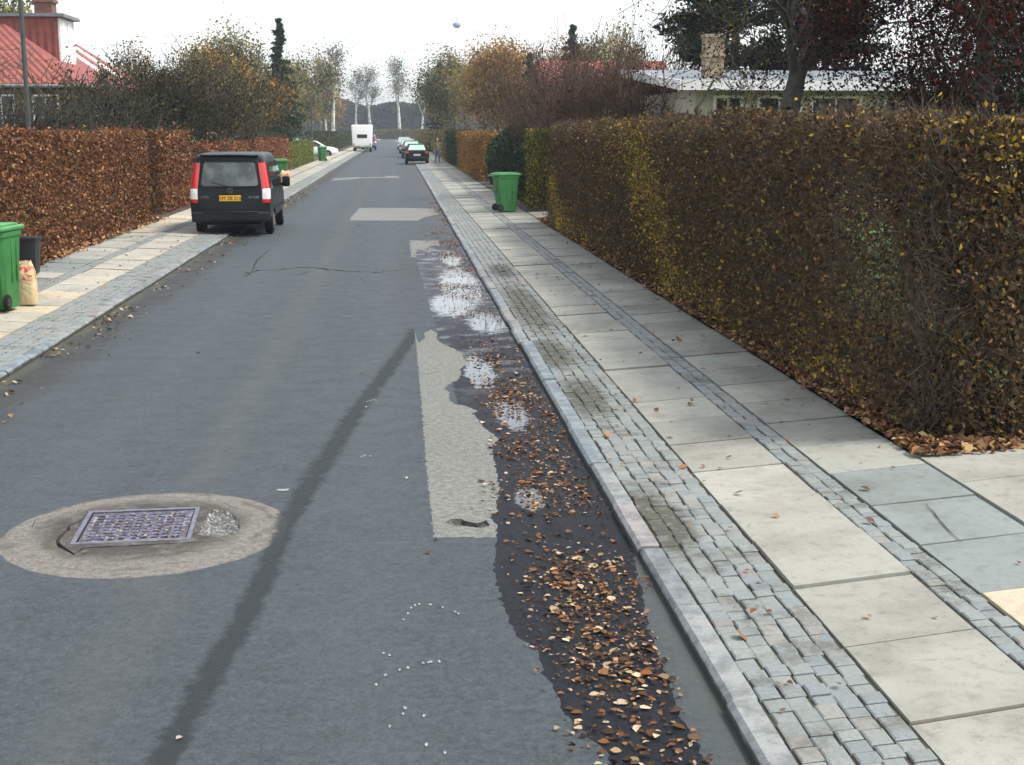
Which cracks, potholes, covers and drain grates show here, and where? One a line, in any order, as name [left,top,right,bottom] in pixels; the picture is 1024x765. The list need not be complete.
pothole [197,509,240,537]
crack [243,250,406,287]
pothole [446,519,490,528]
